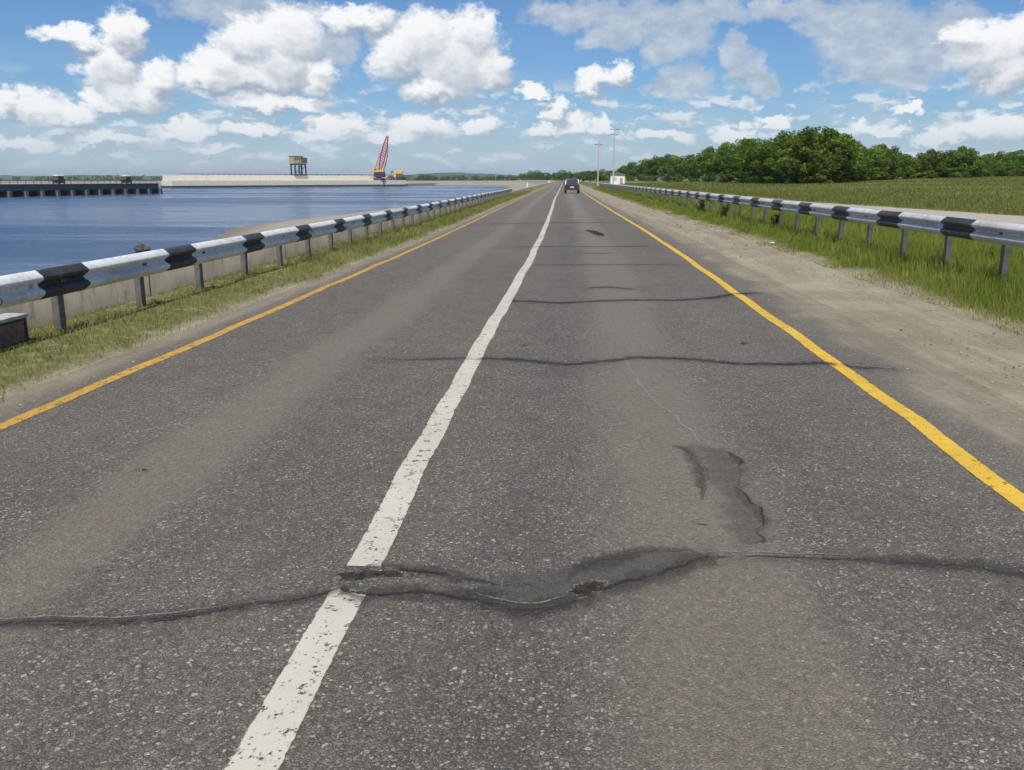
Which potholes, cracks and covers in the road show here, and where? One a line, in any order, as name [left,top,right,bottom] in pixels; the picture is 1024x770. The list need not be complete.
pothole [565,578,610,598]
pothole [330,567,412,583]
crack [0,356,1024,626]
crack [511,286,752,304]
crack [538,246,654,265]
